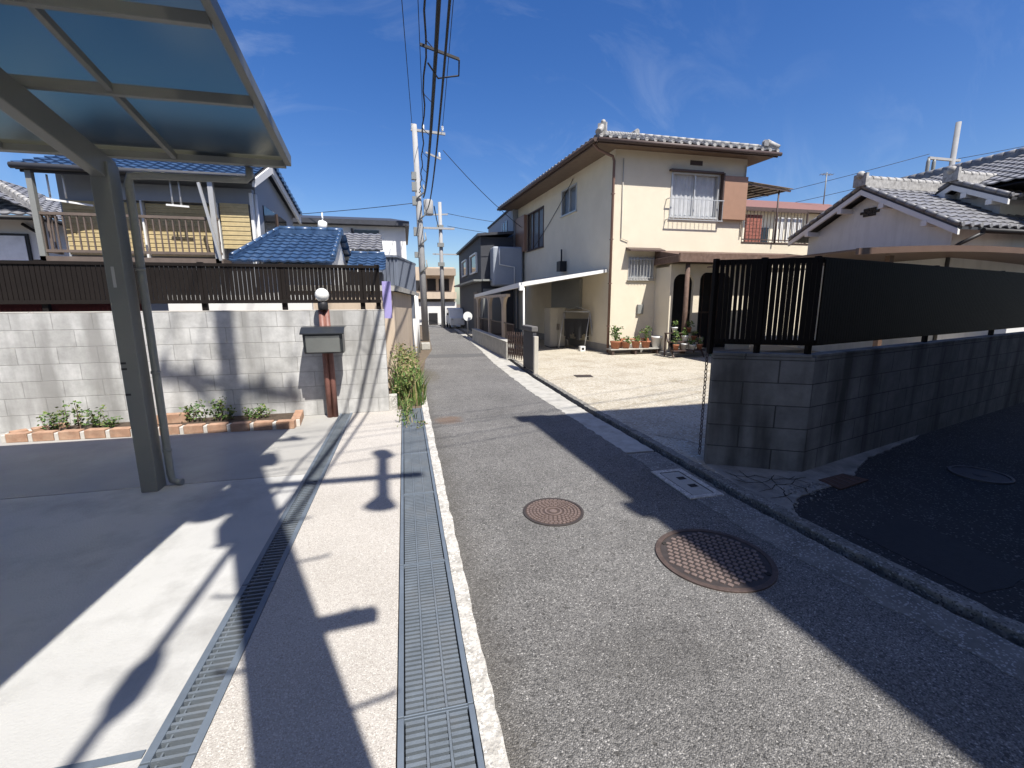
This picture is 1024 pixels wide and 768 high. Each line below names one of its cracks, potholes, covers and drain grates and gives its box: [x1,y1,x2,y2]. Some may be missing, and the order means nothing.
drain grate [329,413,353,434]
manhole cover [947,465,1015,485]
drain grate [402,408,425,427]
drain grate [397,704,485,768]
crack [726,470,811,502]
manhole cover [523,498,584,527]
drain grate [398,559,474,719]
drain grate [401,426,430,454]
drain grate [242,504,311,587]
drain grate [401,452,436,495]
manhole cover [655,528,778,593]
drain grate [138,755,196,768]
